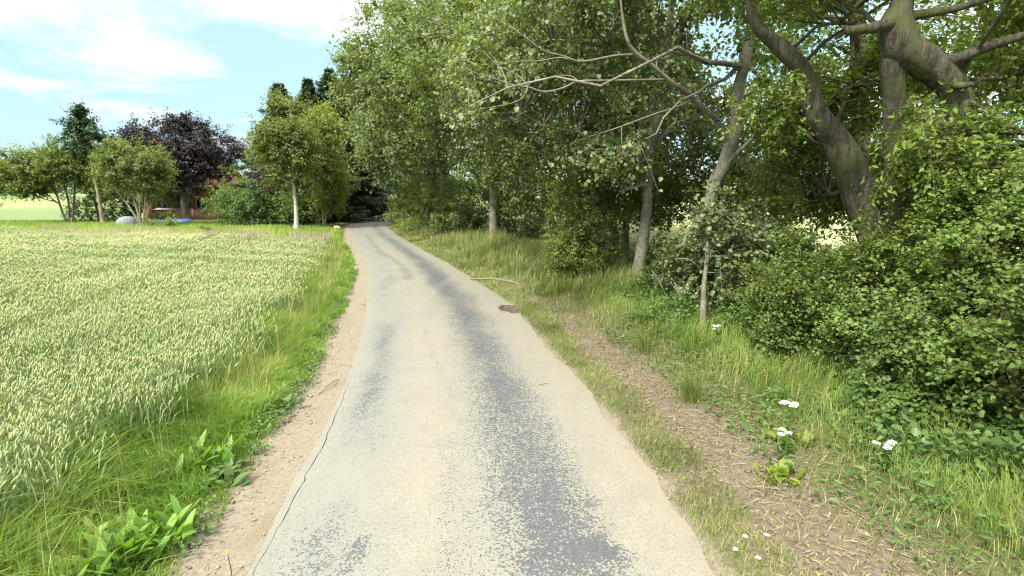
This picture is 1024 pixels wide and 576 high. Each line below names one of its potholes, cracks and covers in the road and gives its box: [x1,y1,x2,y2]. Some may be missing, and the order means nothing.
crack [253,374,353,575]
pothole [498,305,520,313]
